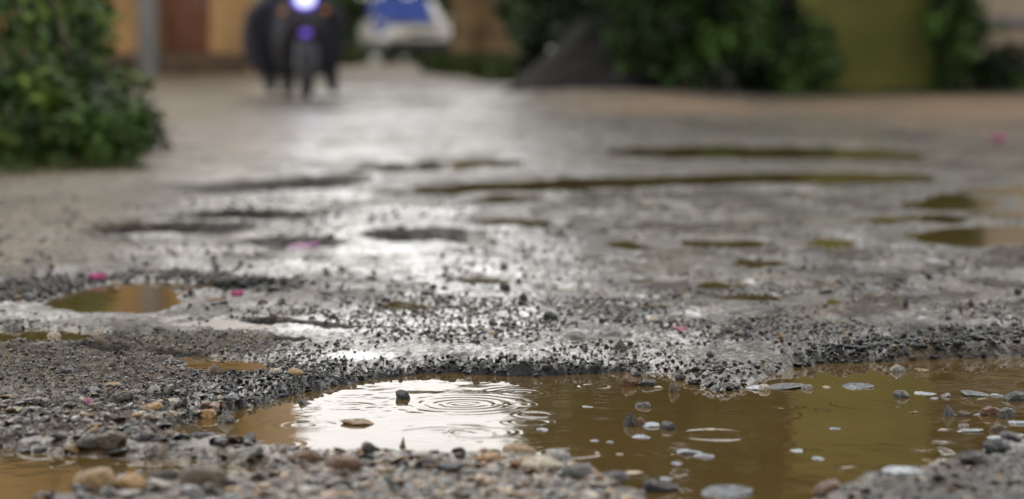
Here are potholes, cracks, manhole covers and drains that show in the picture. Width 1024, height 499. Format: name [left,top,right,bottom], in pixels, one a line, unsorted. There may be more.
pothole [356,226,476,242]
pothole [22,273,260,314]
pothole [868,219,1024,249]
pothole [581,140,963,160]
pothole [136,339,1024,499]
pothole [0,429,303,499]
